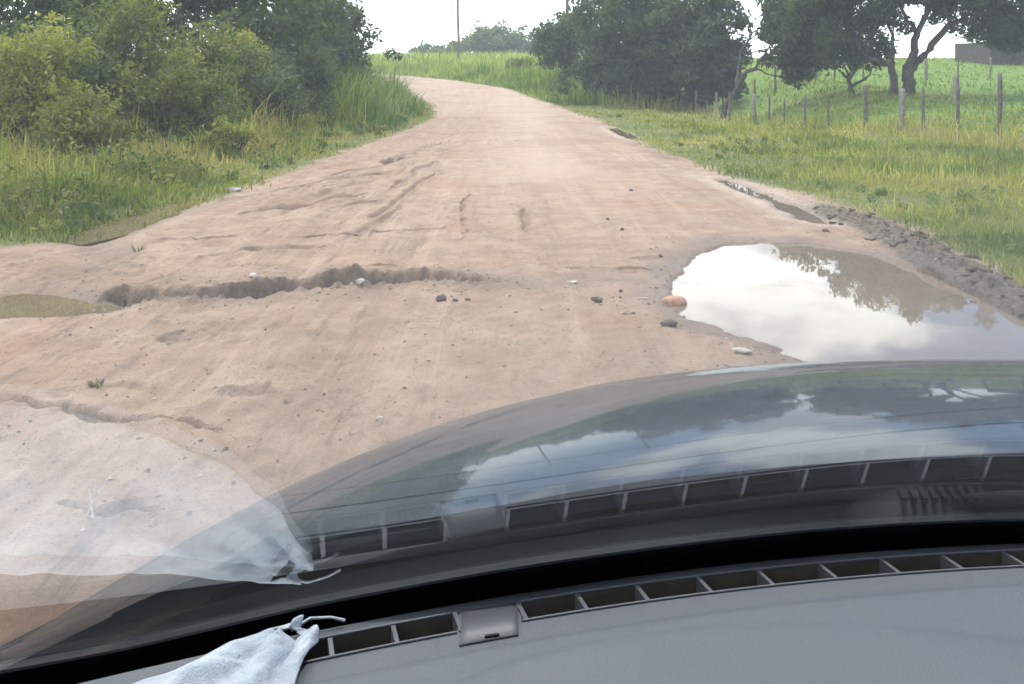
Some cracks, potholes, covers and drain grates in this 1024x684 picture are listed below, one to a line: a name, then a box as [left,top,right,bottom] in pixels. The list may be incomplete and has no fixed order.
pothole [36,296,114,318]
pothole [99,263,506,308]
pothole [662,239,1024,355]
